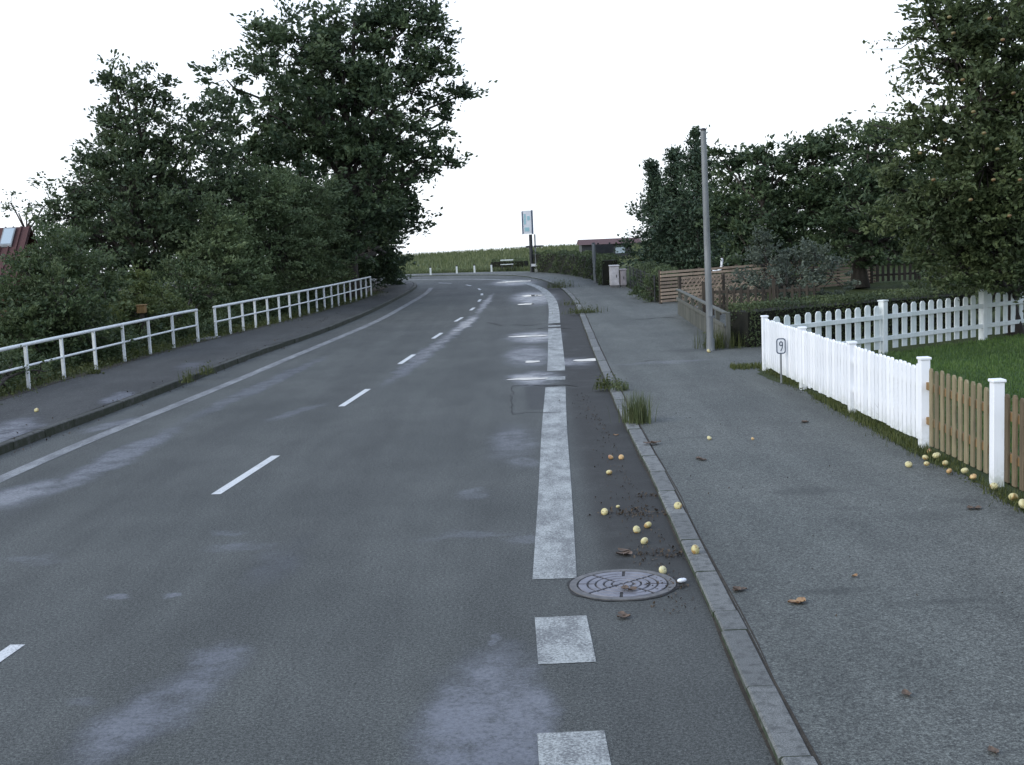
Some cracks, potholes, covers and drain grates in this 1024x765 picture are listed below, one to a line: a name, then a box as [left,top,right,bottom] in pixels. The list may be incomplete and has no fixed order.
manhole cover [567,569,679,601]
